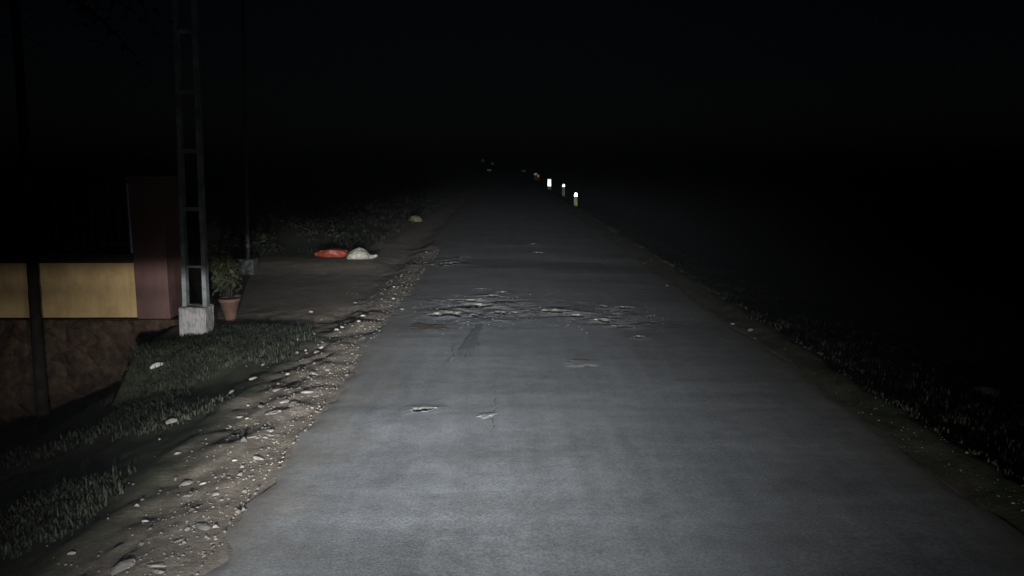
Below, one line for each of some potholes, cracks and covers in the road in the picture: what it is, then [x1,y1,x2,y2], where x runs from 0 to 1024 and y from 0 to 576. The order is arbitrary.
pothole [419,310,472,319]
pothole [445,302,503,310]
pothole [400,404,449,416]
